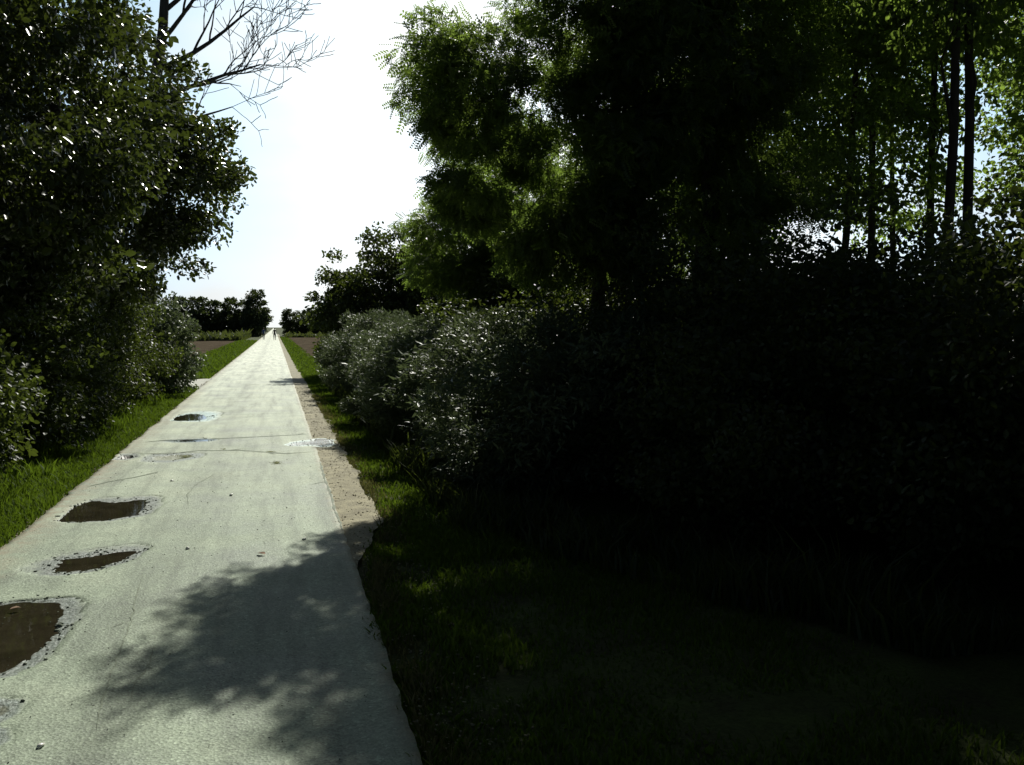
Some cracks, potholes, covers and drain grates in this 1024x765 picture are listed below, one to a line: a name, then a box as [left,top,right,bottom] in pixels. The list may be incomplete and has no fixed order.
pothole [19,543,153,577]
pothole [170,411,223,422]
pothole [284,438,336,447]
pothole [0,595,86,680]
pothole [139,452,205,463]
pothole [53,495,164,523]
